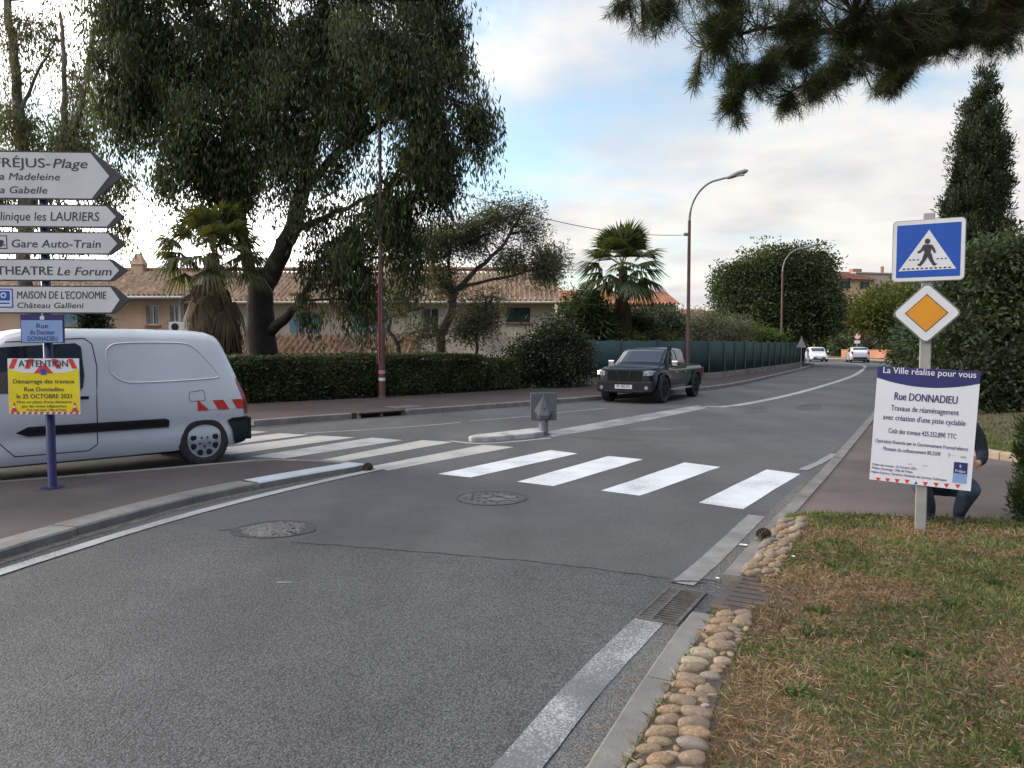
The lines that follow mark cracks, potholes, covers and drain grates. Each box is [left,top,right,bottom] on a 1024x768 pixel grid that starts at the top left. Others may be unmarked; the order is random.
manhole cover [455,491,528,506]
drain grate [709,576,800,619]
drain grate [346,408,405,419]
drain grate [634,586,707,627]
